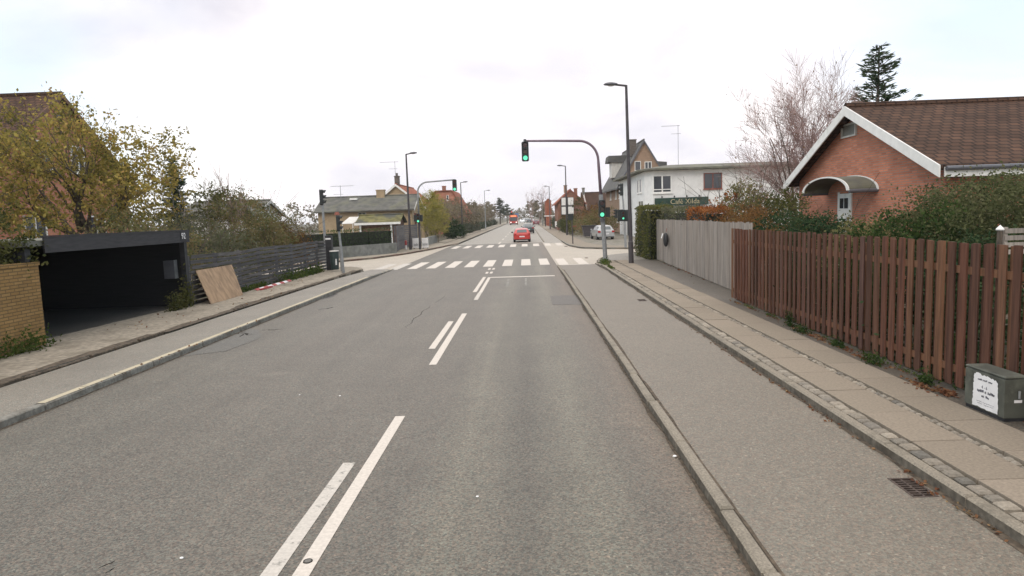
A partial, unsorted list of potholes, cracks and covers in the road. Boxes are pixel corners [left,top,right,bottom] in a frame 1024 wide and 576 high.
drain grate [887,478,940,497]
